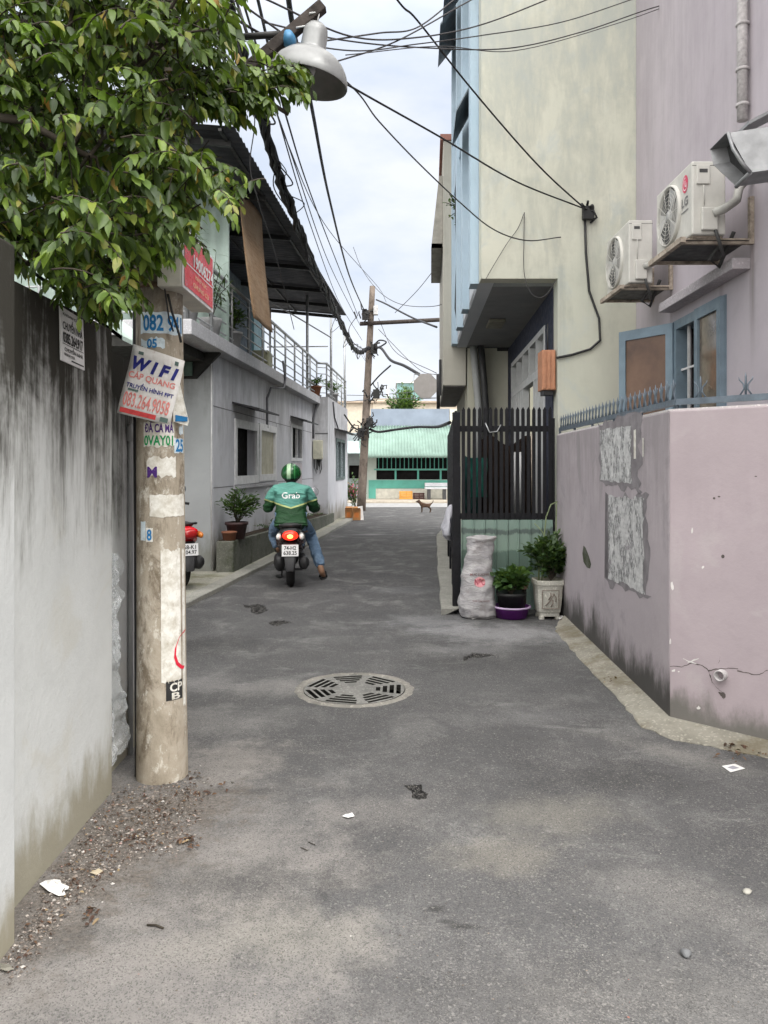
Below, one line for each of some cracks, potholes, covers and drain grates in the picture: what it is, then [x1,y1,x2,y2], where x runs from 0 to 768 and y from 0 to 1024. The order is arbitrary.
pothole [243,603,268,614]
pothole [463,652,499,661]
pothole [403,783,429,800]
